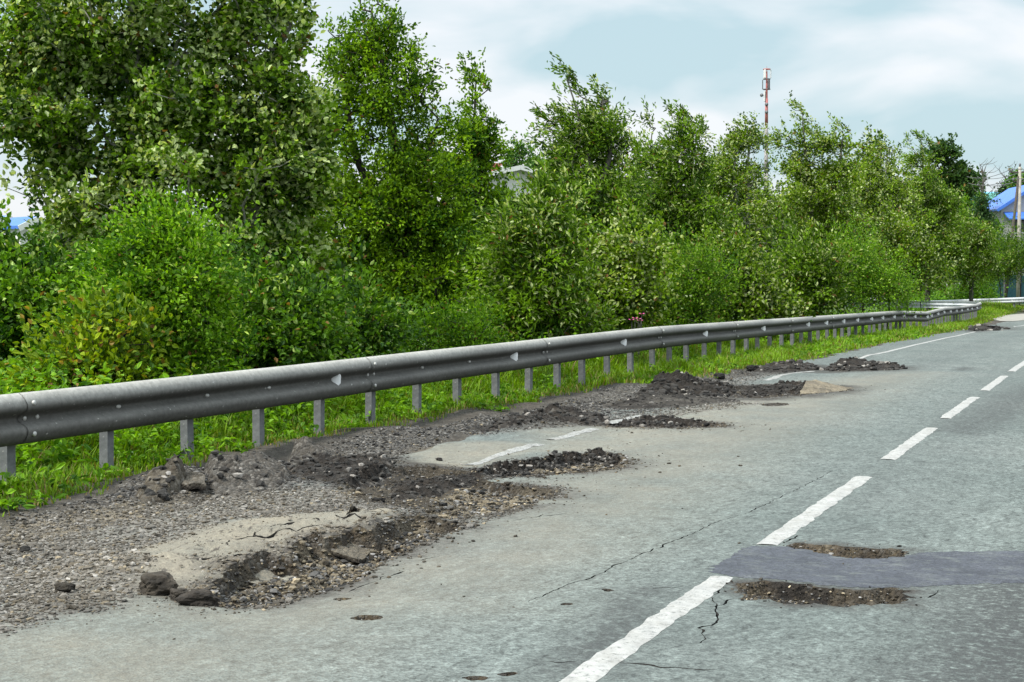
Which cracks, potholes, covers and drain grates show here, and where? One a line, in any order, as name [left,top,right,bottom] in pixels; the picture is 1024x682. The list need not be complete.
crack [528,472,829,602]
pothole [479,453,630,477]
pothole [732,580,915,607]
pothole [207,515,462,608]
pothole [342,466,558,519]
pothole [787,542,909,559]
crack [690,586,737,644]
crack [191,509,385,564]
pothole [730,384,850,398]
